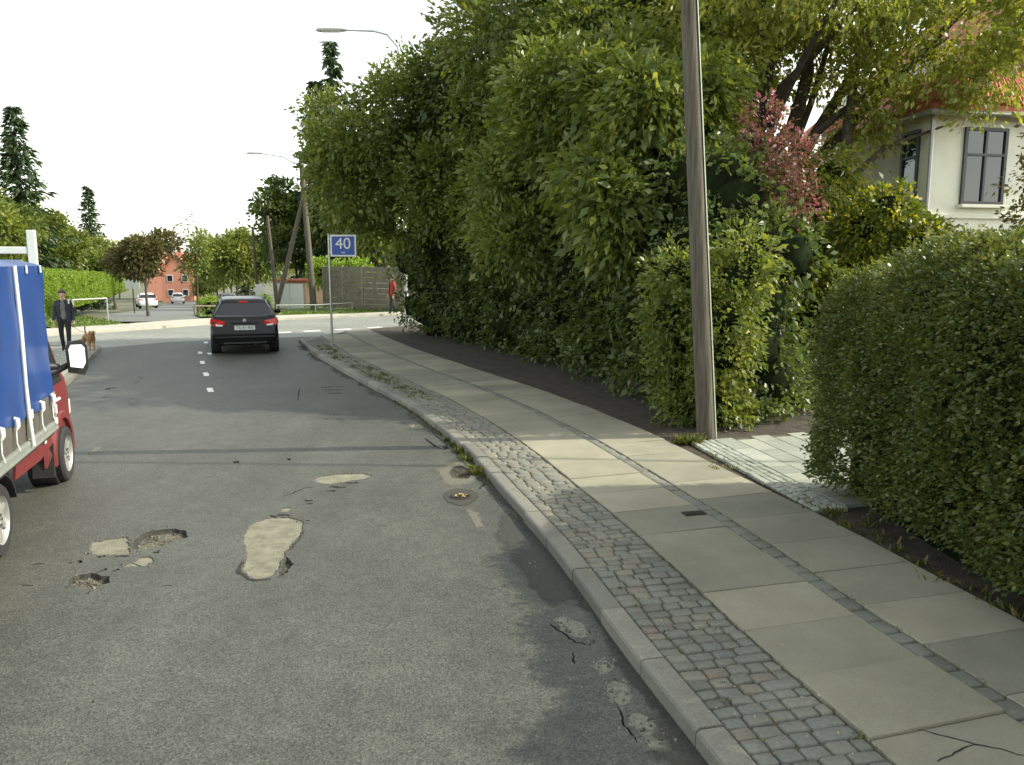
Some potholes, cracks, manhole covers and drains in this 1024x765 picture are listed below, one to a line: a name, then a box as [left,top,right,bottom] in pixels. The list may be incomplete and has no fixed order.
crack [617,707,637,742]
crack [918,729,1021,761]
pothole [68,573,110,589]
pothole [449,466,471,479]
crack [550,623,586,664]
pothole [132,529,188,550]
